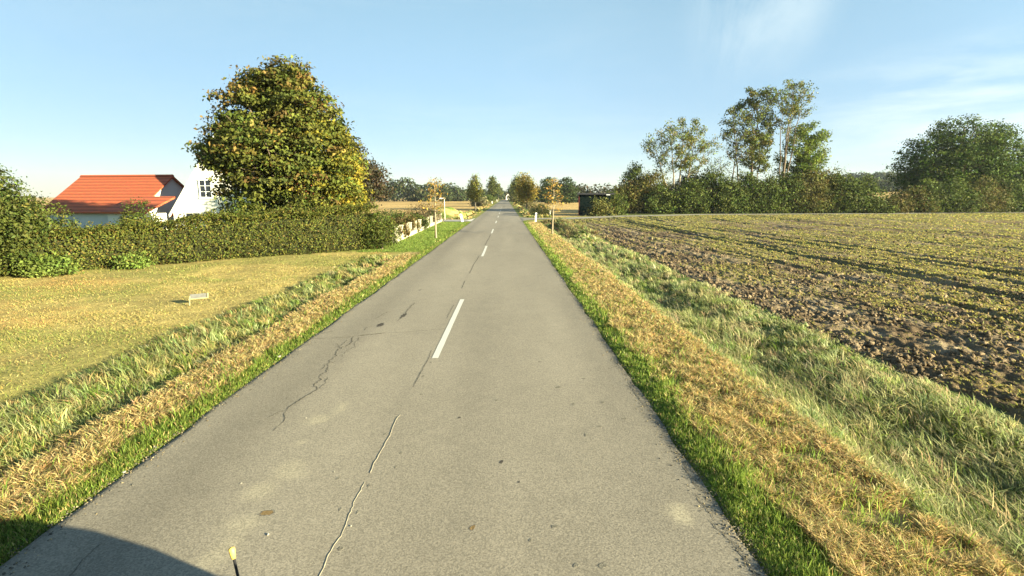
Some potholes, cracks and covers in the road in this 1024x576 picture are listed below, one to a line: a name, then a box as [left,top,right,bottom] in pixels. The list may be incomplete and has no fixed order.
crack [269,303,415,431]
